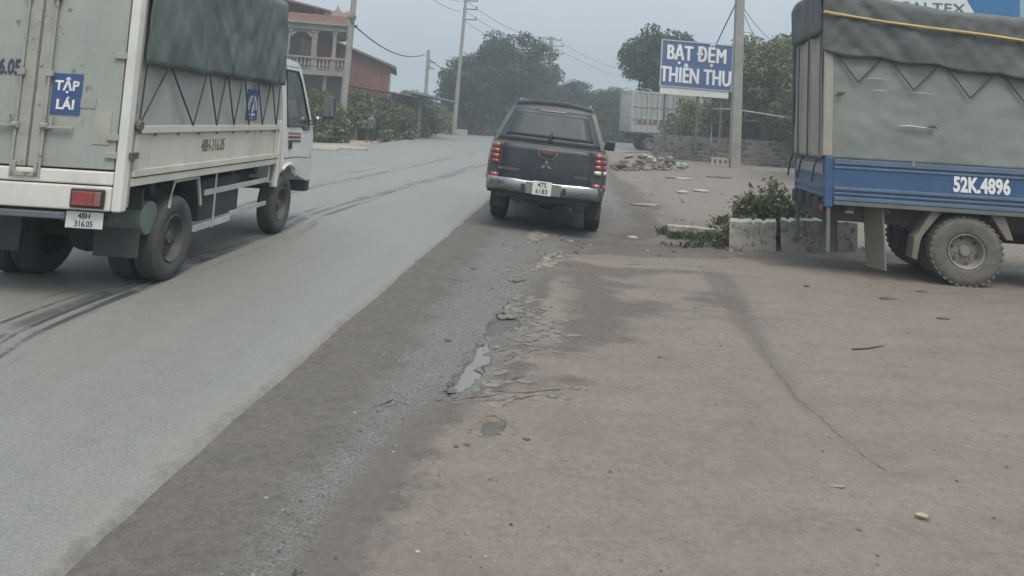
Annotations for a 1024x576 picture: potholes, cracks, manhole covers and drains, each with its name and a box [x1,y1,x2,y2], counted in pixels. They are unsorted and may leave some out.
pothole [437,335,505,401]
crack [724,288,886,471]
pothole [467,414,520,445]
pothole [481,309,529,338]
